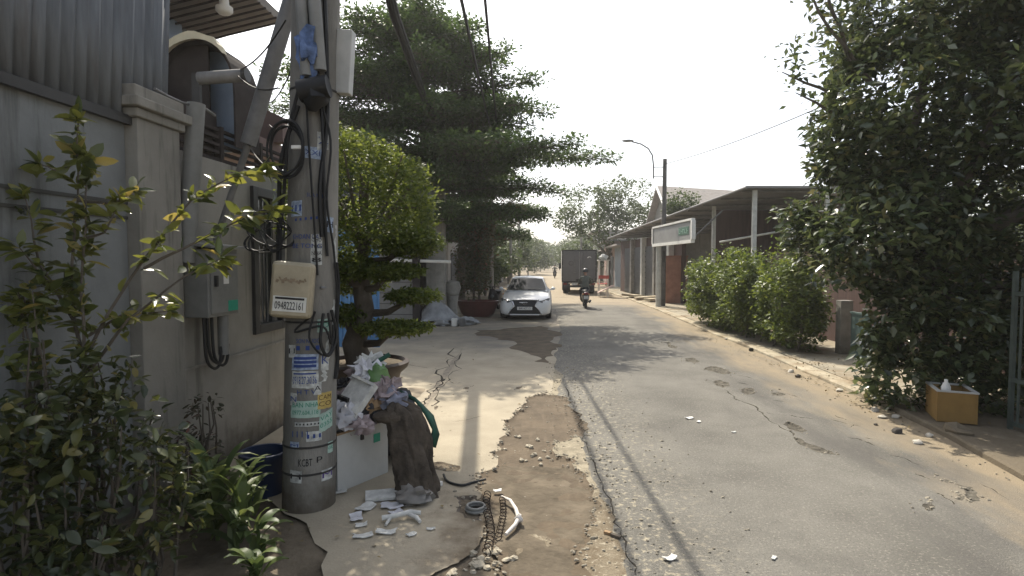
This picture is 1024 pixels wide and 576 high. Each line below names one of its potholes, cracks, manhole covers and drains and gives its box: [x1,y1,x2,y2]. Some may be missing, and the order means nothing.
crack [423,347,462,406]
pothole [964,486,980,502]
crack [567,390,637,575]
pothole [784,422,807,433]
pothole [475,394,601,576]
pothole [704,366,732,374]
